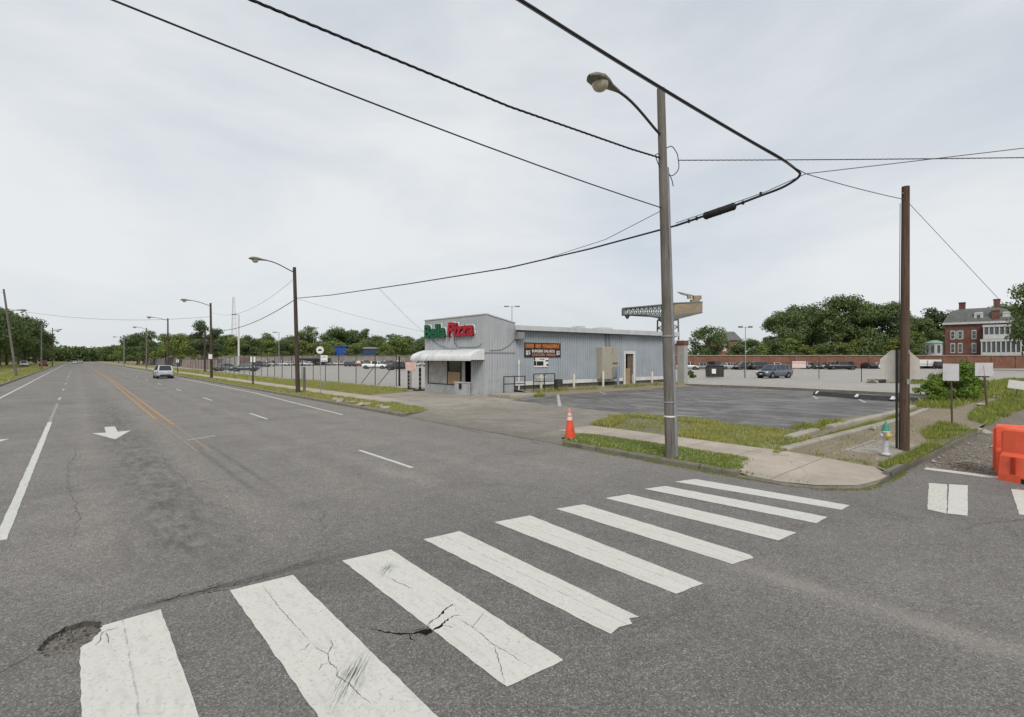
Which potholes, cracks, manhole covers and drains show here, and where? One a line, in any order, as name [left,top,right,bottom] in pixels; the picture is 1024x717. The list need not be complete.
pothole [37,621,102,657]
crack [372,604,531,681]
crack [155,559,367,700]
